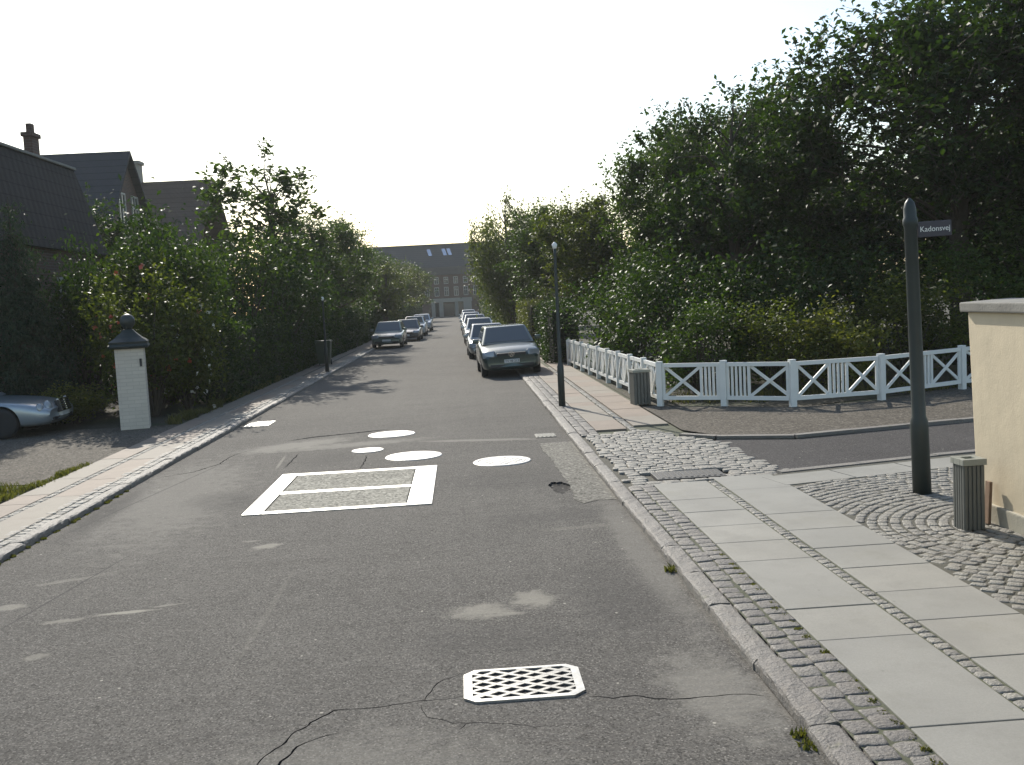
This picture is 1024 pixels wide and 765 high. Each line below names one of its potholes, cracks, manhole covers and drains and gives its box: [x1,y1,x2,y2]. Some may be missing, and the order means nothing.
crack [286,429,387,467]
pothole [548,482,571,494]
drain grate [464,664,585,704]
crack [257,674,556,765]
